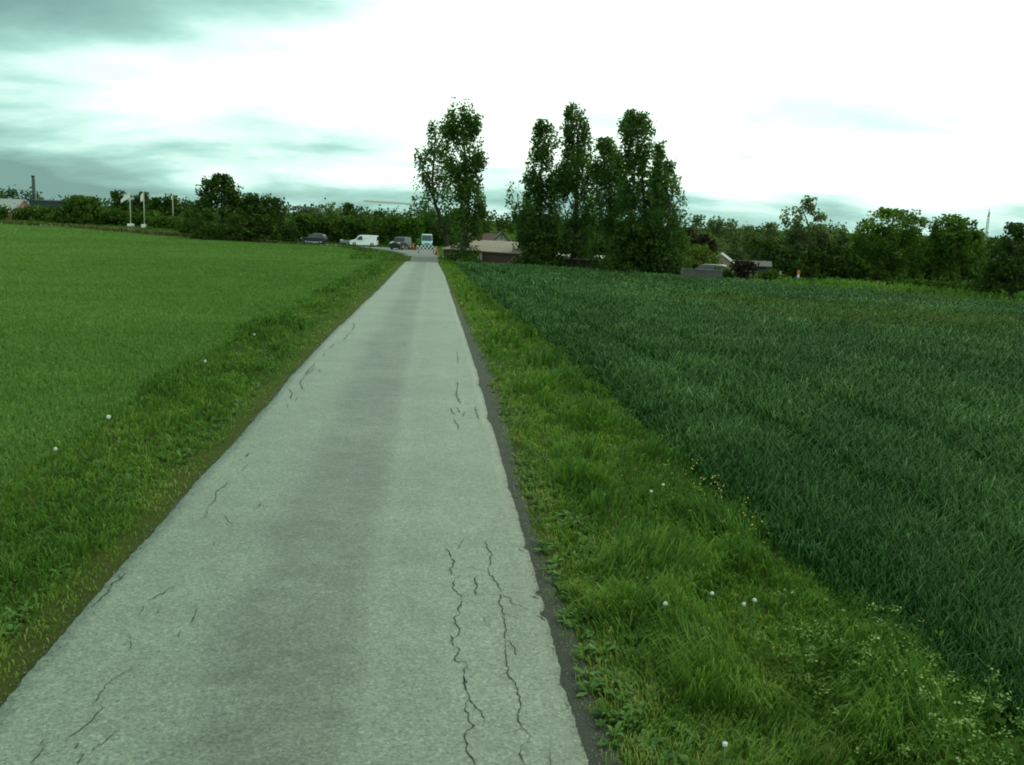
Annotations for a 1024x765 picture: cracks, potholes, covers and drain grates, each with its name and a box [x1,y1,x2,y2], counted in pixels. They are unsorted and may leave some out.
crack [445,539,546,765]
crack [66,668,132,764]
